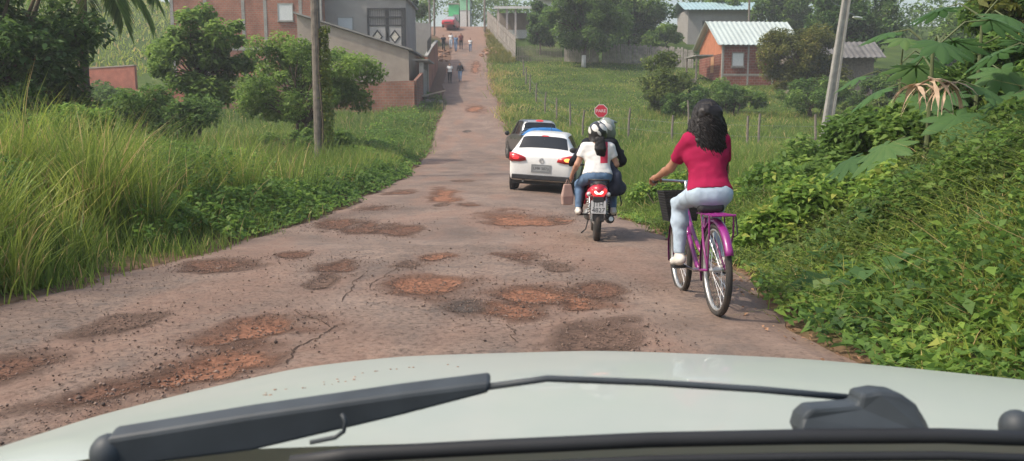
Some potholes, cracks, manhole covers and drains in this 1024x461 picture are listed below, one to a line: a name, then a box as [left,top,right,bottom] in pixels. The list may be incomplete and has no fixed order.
pothole [190,316,291,346]
pothole [183,259,257,273]
pothole [498,287,566,305]
pothole [545,263,571,272]
pothole [366,224,422,236]
pothole [551,293,600,310]
pothole [571,283,623,299]
crack [286,309,340,363]
pothole [485,302,544,319]
pothole [0,355,58,381]
pothole [485,210,556,226]
pothole [449,300,482,312]
